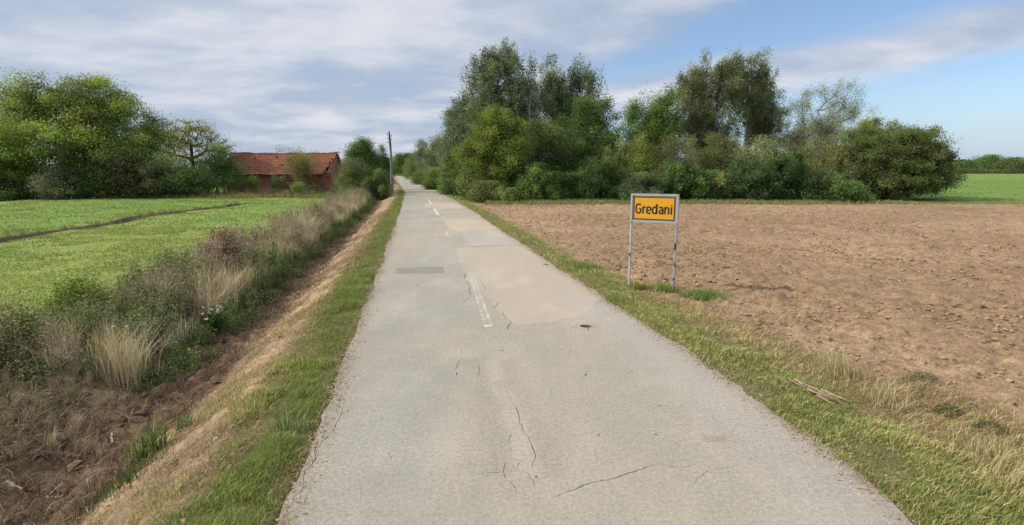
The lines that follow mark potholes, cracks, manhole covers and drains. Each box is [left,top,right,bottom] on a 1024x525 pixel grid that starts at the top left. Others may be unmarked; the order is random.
crack [552,464,735,498]
crack [477,388,536,490]
